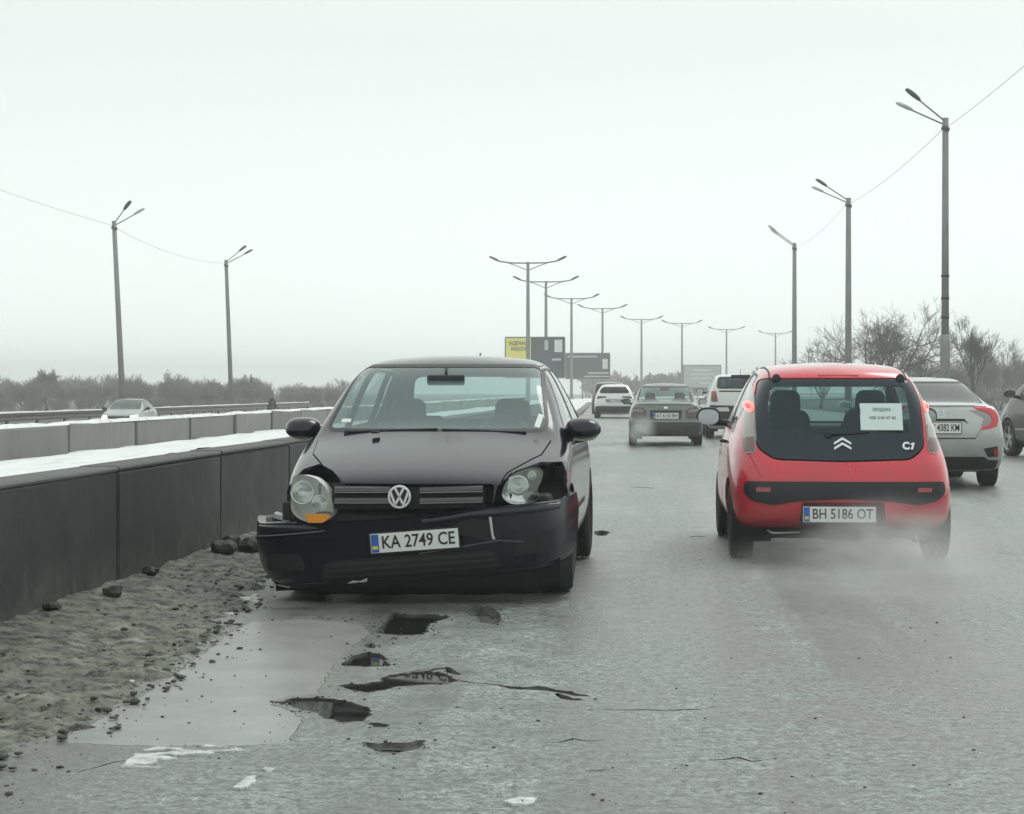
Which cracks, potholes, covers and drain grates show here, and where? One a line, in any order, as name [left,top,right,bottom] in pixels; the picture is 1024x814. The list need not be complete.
pothole [341,652,392,667]
pothole [279,697,374,723]
pothole [375,613,450,635]
pothole [361,740,426,754]
pothole [467,606,503,625]
pothole [339,671,458,693]
crack [403,667,704,711]
